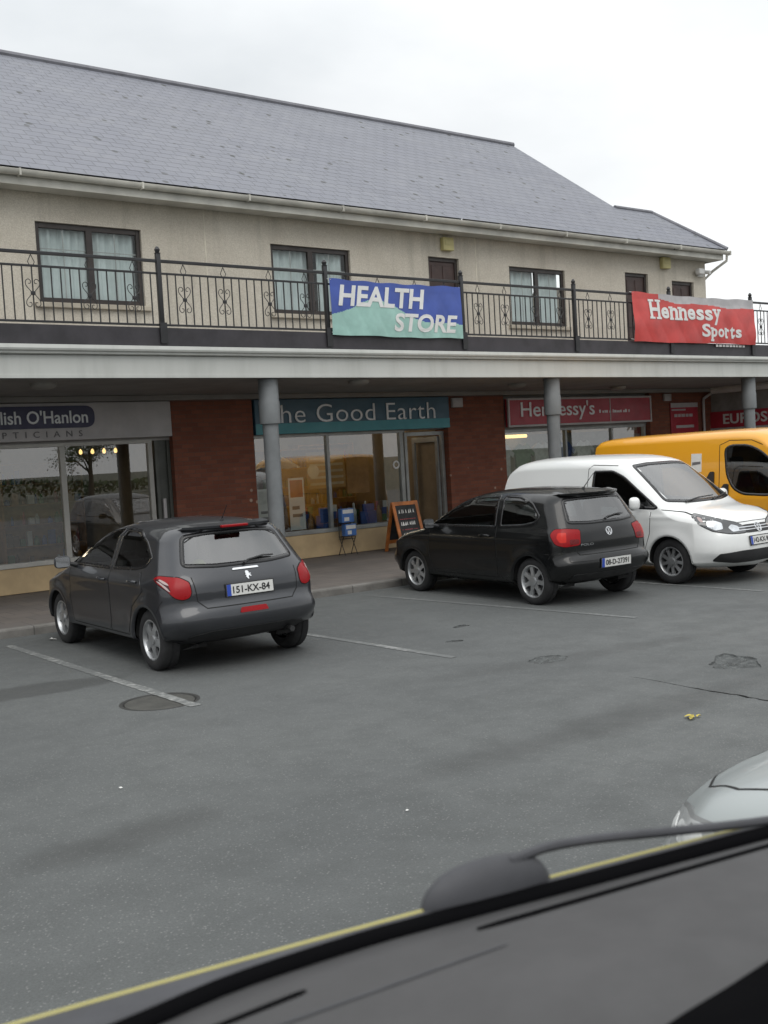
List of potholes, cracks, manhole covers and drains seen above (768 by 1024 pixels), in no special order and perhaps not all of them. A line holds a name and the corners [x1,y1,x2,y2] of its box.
pothole [708,653,761,670]
manhole cover [119,692,200,711]
crack [629,676,768,701]
